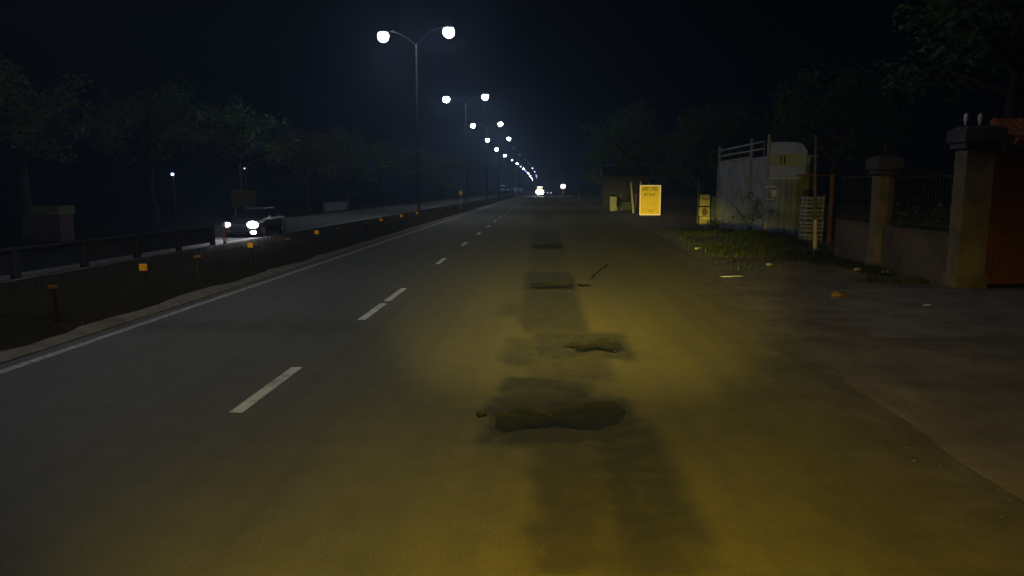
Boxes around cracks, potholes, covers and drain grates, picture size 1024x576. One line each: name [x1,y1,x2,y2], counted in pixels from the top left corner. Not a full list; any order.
pothole [562,337,626,353]
pothole [495,401,626,433]
